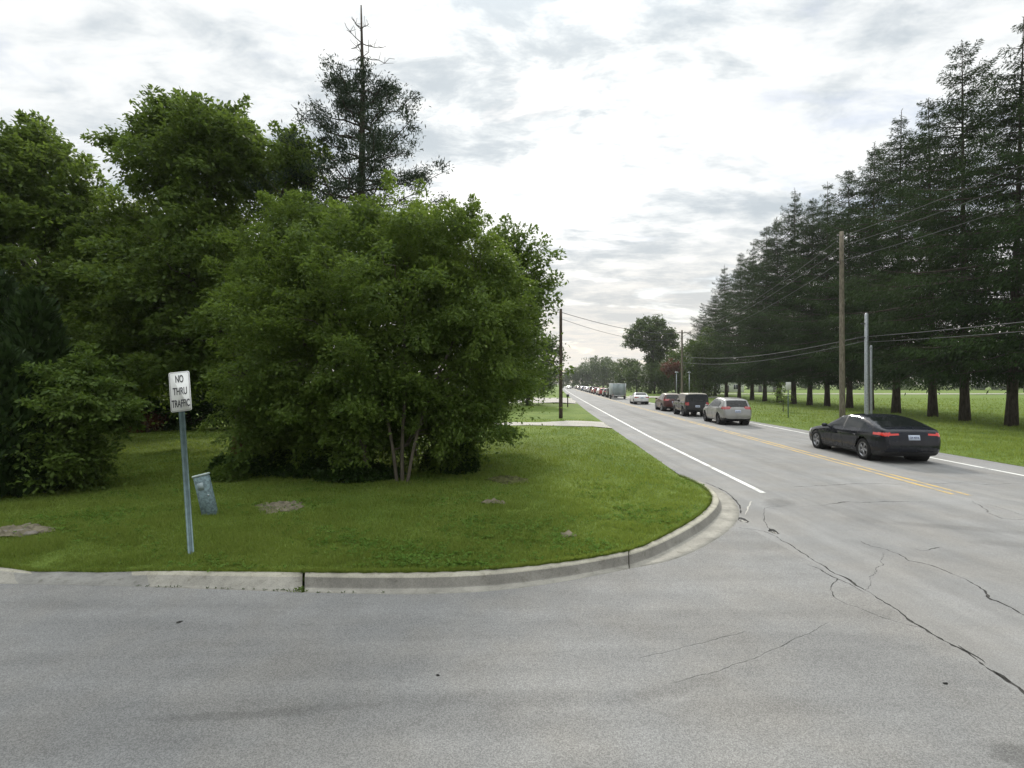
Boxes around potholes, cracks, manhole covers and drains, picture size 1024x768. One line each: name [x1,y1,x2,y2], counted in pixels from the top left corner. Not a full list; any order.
crack [745,483,1024,694]
crack [682,622,829,681]
